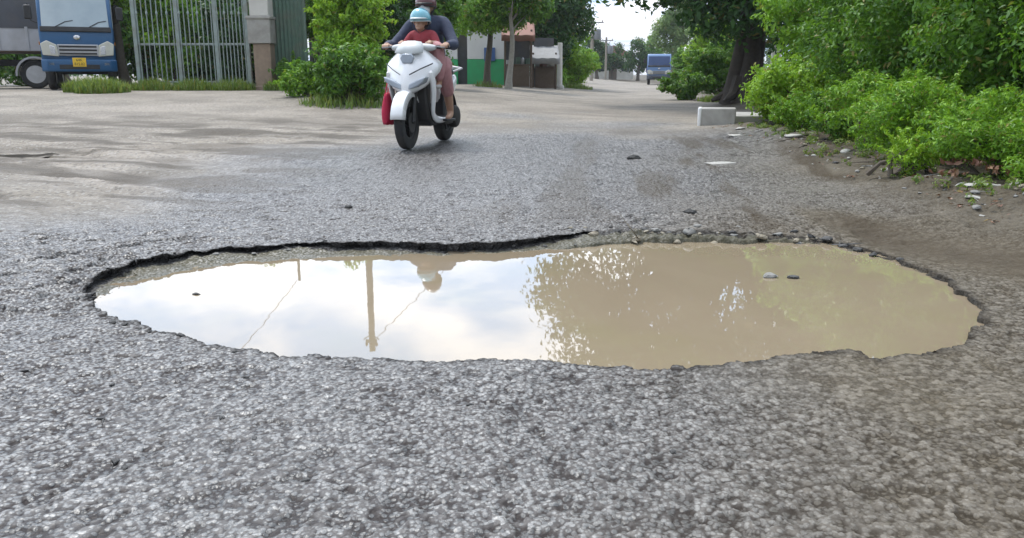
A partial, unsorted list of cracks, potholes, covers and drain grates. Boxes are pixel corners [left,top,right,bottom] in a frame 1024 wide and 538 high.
pothole [70,227,1004,377]
